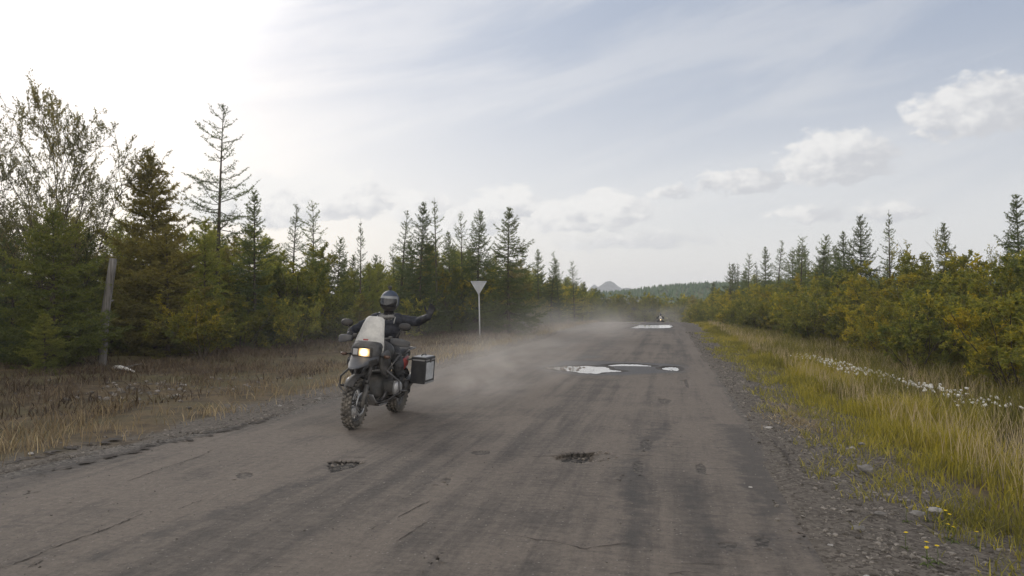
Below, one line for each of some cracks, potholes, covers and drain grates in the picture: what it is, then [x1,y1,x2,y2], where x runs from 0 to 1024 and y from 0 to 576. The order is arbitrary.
pothole [226,470,263,481]
pothole [540,365,628,374]
pothole [632,439,660,452]
pothole [462,449,498,457]
pothole [317,458,375,475]
pothole [687,461,716,477]
